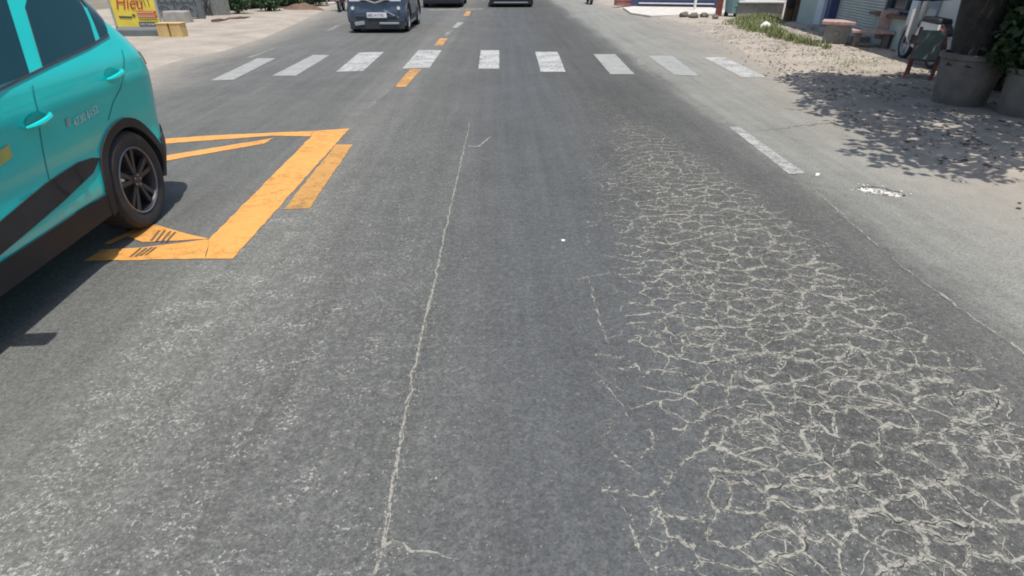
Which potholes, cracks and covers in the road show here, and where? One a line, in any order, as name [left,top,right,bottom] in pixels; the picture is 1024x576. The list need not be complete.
crack [366,122,491,576]
pothole [845,183,912,197]
